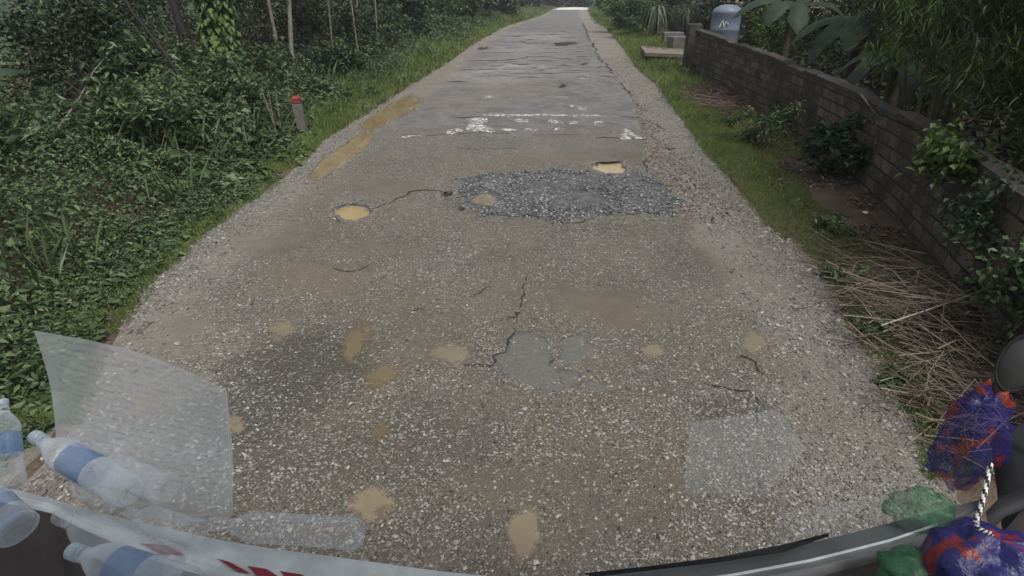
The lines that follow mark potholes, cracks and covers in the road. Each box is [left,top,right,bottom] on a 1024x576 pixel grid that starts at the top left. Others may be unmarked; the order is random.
pothole [427,343,470,368]
pothole [328,201,376,223]
pothole [472,194,497,206]
crack [463,276,528,366]
pothole [587,160,630,174]
crack [704,355,762,426]
crack [375,189,450,208]
pothole [347,487,395,522]
pothole [342,322,375,364]
pothole [507,507,541,562]
